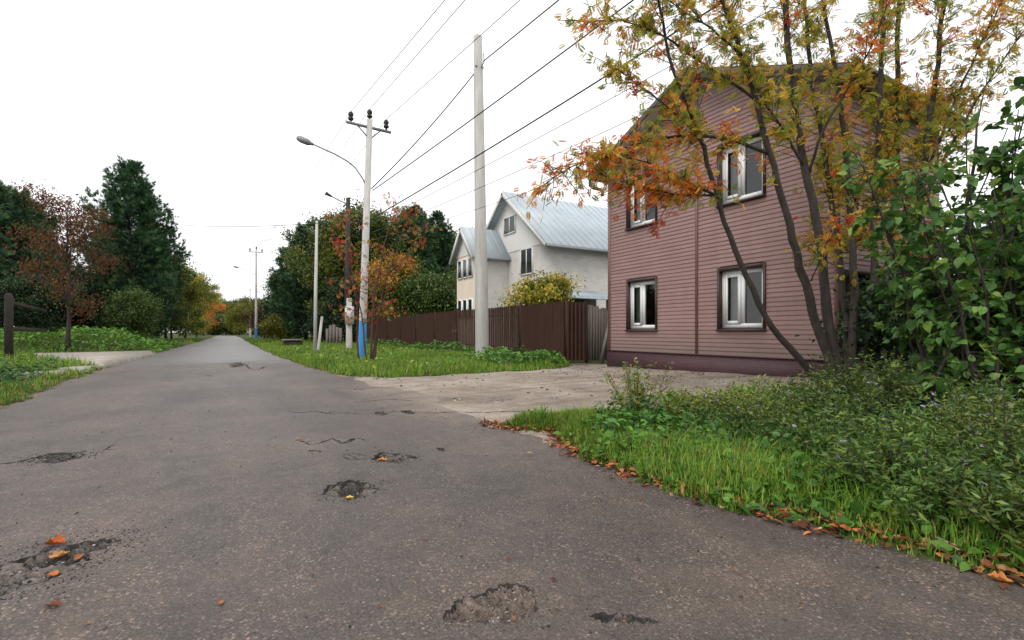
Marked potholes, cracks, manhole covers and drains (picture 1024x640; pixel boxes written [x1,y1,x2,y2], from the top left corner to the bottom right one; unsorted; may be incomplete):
pothole [307,475,387,509]
pothole [590,609,665,625]
crack [290,389,528,414]
crack [301,438,369,460]
pothole [359,450,423,465]
pothole [419,575,560,631]
pothole [19,450,103,468]
